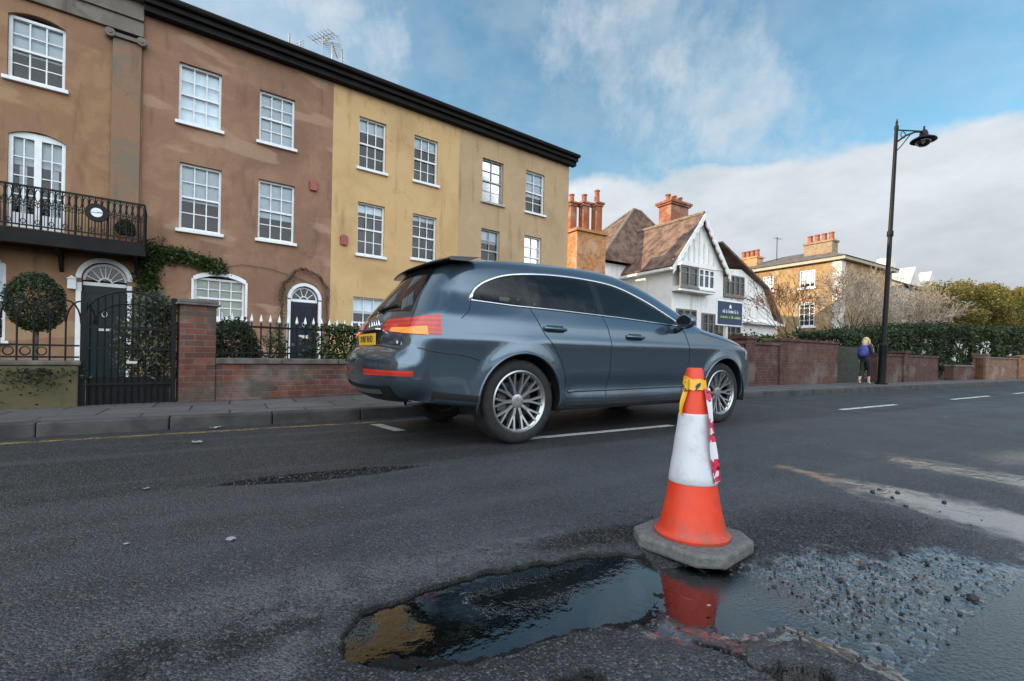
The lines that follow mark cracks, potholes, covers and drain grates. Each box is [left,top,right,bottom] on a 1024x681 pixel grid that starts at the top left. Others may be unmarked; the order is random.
pothole [759,654,838,681]
pothole [338,551,669,674]
